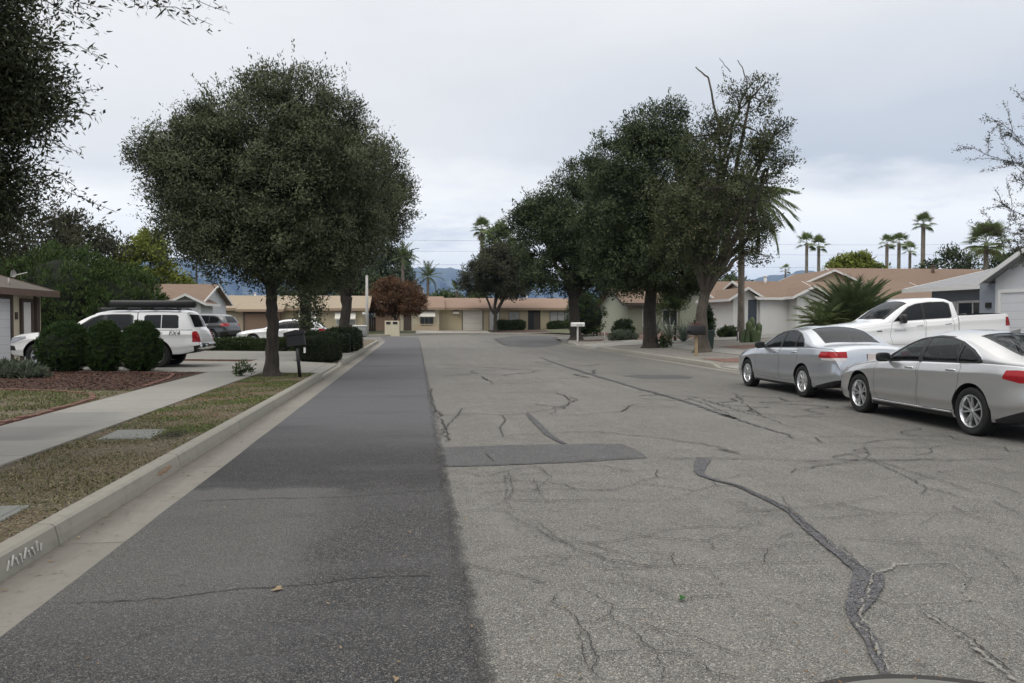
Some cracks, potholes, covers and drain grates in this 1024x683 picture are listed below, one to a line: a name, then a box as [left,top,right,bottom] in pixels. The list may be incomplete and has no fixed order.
crack [202,361,1023,681]
crack [74,575,446,603]
manhole cover [818,674,986,683]
